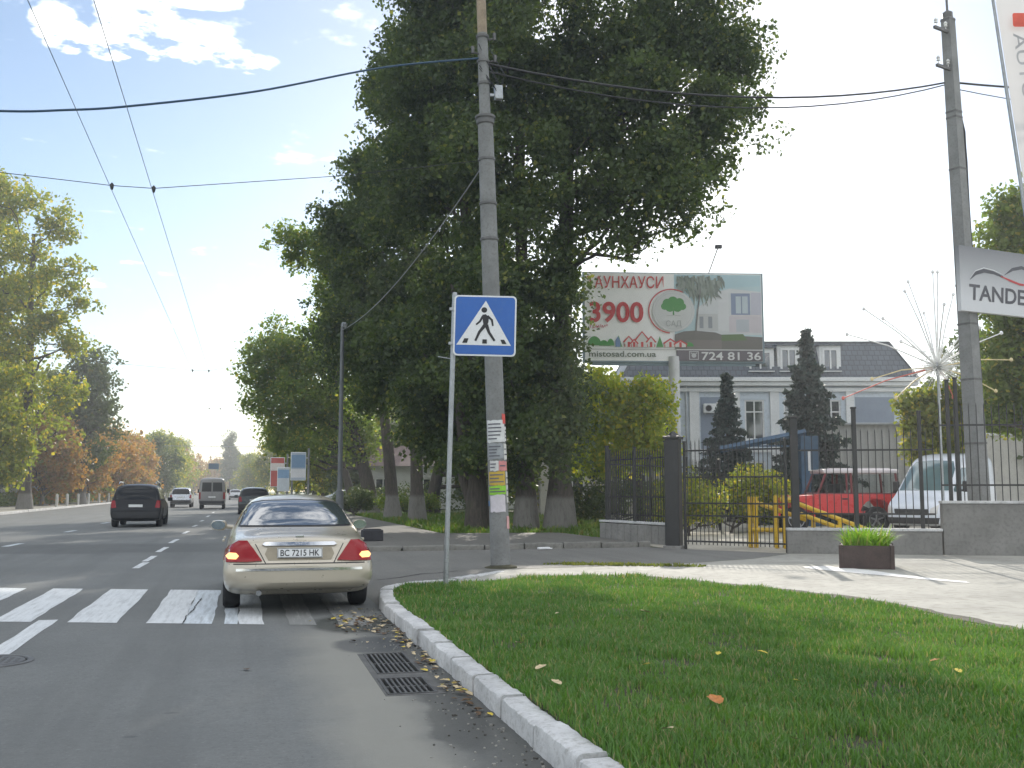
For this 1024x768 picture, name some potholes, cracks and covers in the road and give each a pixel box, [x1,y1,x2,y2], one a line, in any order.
drain grate [357,652,447,696]
manhole cover [0,654,34,668]
